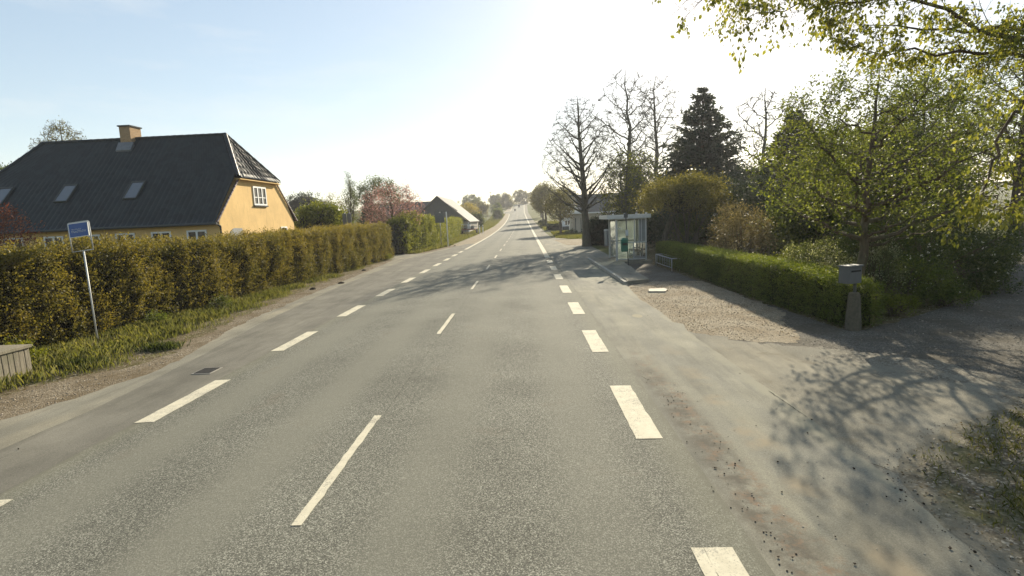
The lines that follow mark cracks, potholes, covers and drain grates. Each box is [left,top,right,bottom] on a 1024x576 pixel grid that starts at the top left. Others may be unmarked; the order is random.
drain grate [191,367,223,375]
